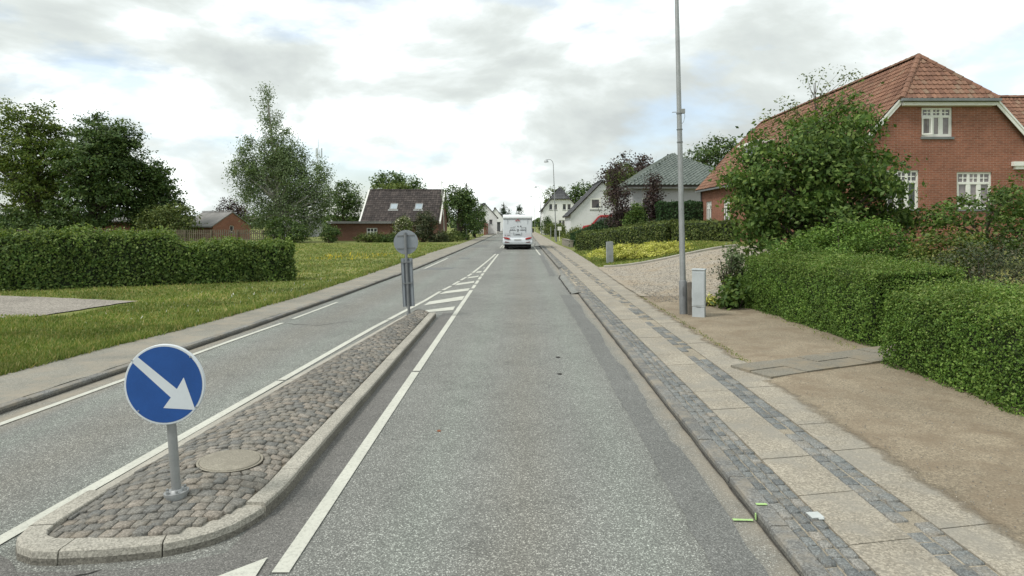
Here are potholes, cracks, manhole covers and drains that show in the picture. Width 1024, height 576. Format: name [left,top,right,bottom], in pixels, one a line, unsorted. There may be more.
manhole cover [196,449,263,475]
